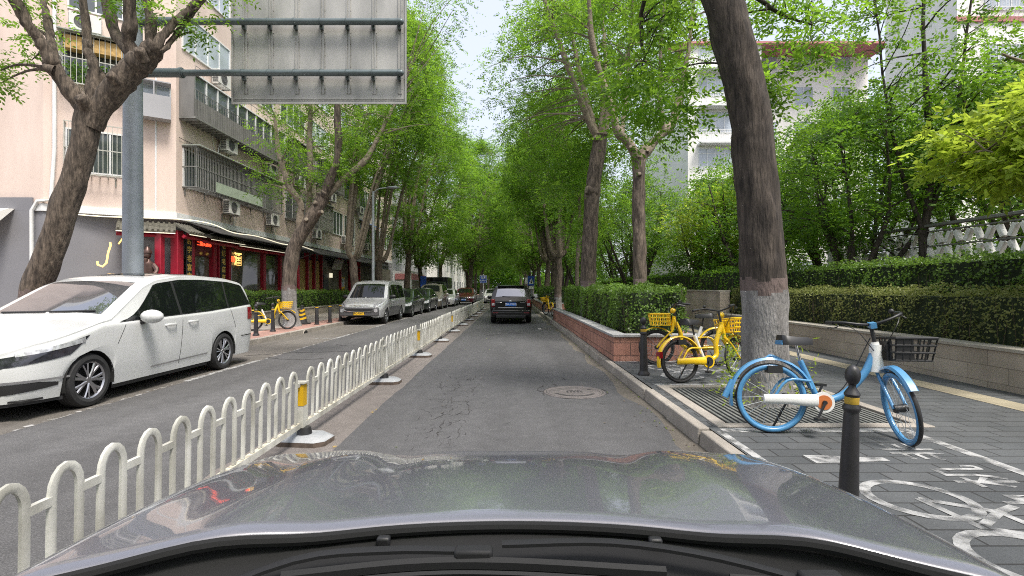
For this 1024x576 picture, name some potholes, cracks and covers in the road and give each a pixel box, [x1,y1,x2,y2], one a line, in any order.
crack [407,376,509,446]
manhole cover [544,386,606,399]
